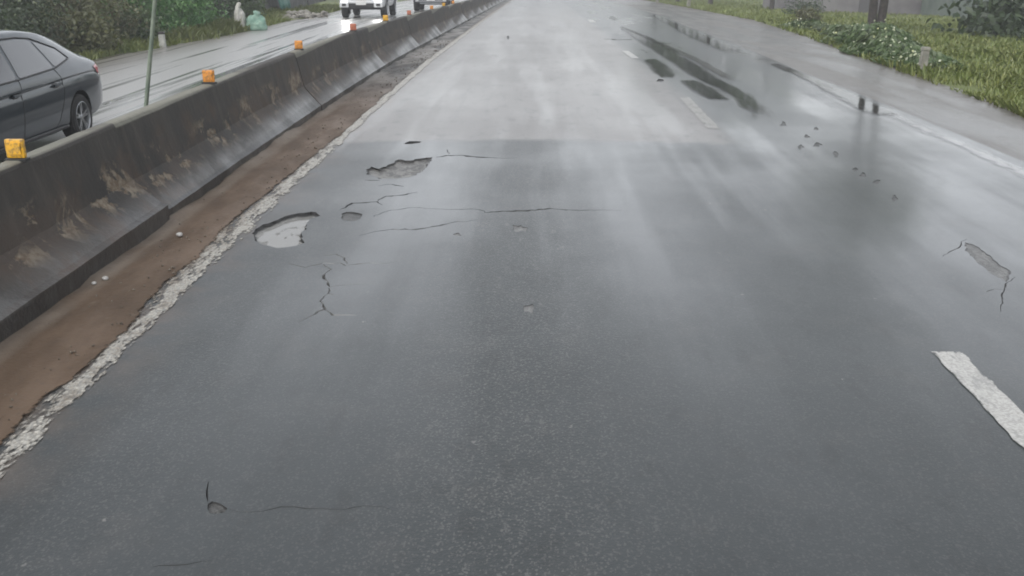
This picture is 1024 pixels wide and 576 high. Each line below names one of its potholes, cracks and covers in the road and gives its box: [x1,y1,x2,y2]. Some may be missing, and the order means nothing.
pothole [341,212,362,221]
crack [206,482,393,512]
crack [292,254,392,322]
pothole [366,157,432,179]
pothole [252,212,320,248]
pothole [964,243,1011,282]
crack [342,180,619,236]
